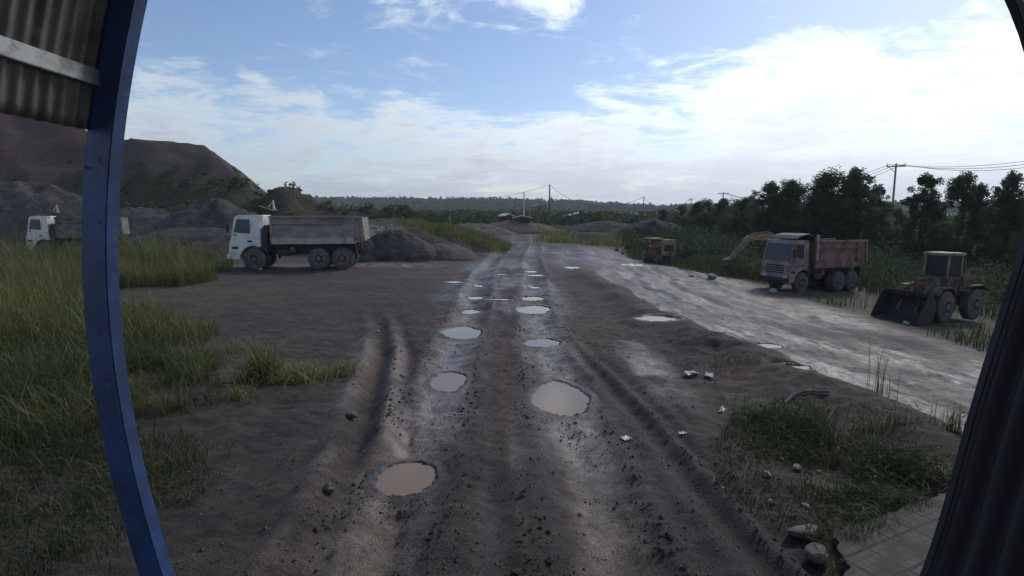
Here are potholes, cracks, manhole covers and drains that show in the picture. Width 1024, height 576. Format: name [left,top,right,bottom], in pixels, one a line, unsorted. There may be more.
pothole [520,376,600,424]
pothole [628,313,688,323]
pothole [768,362,818,373]
pothole [510,304,557,317]
pothole [752,342,788,350]
pothole [422,369,474,396]
pothole [361,457,450,506]
pothole [517,337,567,349]
pothole [433,325,489,342]
